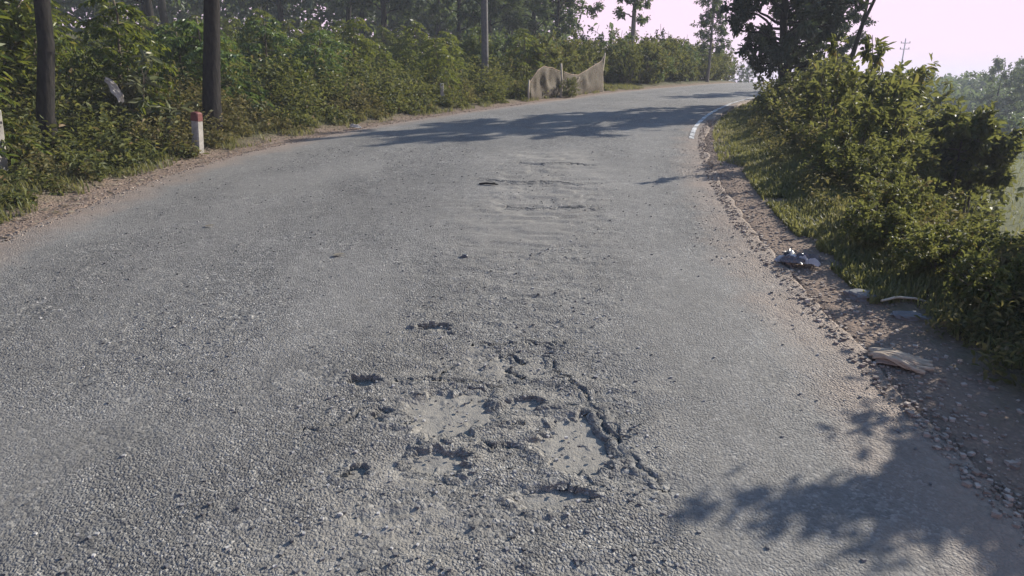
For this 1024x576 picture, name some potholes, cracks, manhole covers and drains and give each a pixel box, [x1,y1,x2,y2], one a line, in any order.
pothole [355,401,414,430]
pothole [375,382,513,456]
pothole [484,391,557,417]
pothole [326,456,381,489]
crack [475,161,602,186]
pothole [496,476,617,520]
crack [302,338,670,493]
pothole [407,320,461,337]
pothole [336,371,393,393]
pothole [508,401,641,491]
pothole [392,440,483,486]
